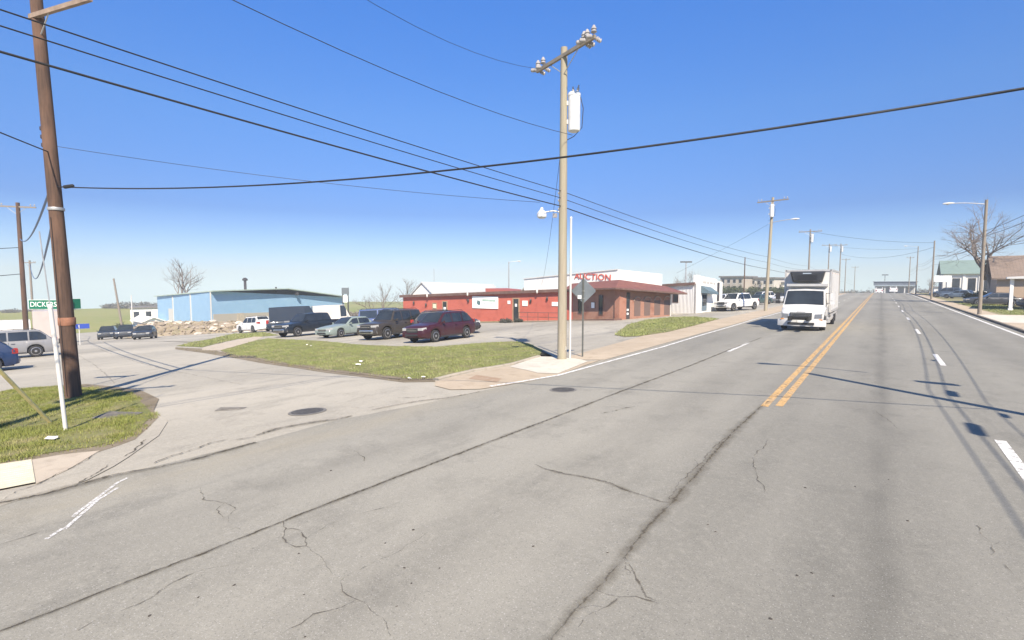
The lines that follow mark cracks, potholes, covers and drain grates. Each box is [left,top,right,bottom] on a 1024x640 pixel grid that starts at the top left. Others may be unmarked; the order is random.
crack [283,507,427,629]
manhole cover [288,407,327,416]
crack [551,407,760,627]
